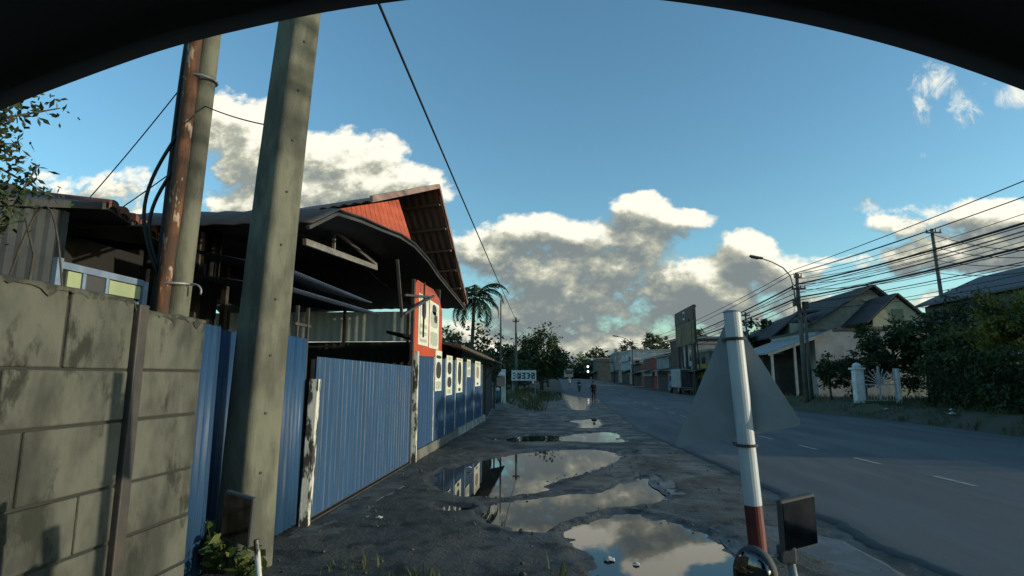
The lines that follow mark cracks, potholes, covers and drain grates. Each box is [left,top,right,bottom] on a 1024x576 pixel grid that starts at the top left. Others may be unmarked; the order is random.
pothole [485,431,629,442]
pothole [424,447,627,497]
pothole [473,474,676,533]
pothole [556,508,742,576]
